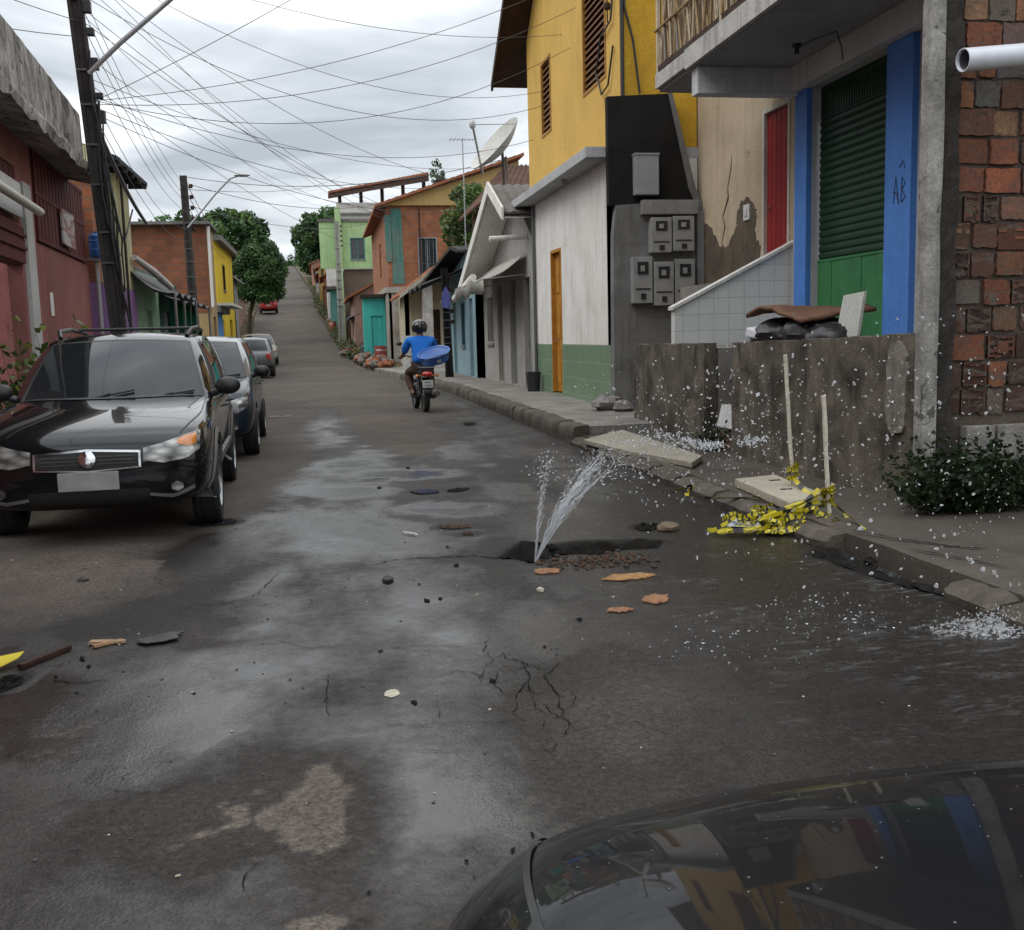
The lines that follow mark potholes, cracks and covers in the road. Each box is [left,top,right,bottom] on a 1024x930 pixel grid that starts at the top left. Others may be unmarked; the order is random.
pothole [500,538,663,563]
crack [390,641,667,752]
crack [379,555,501,564]
